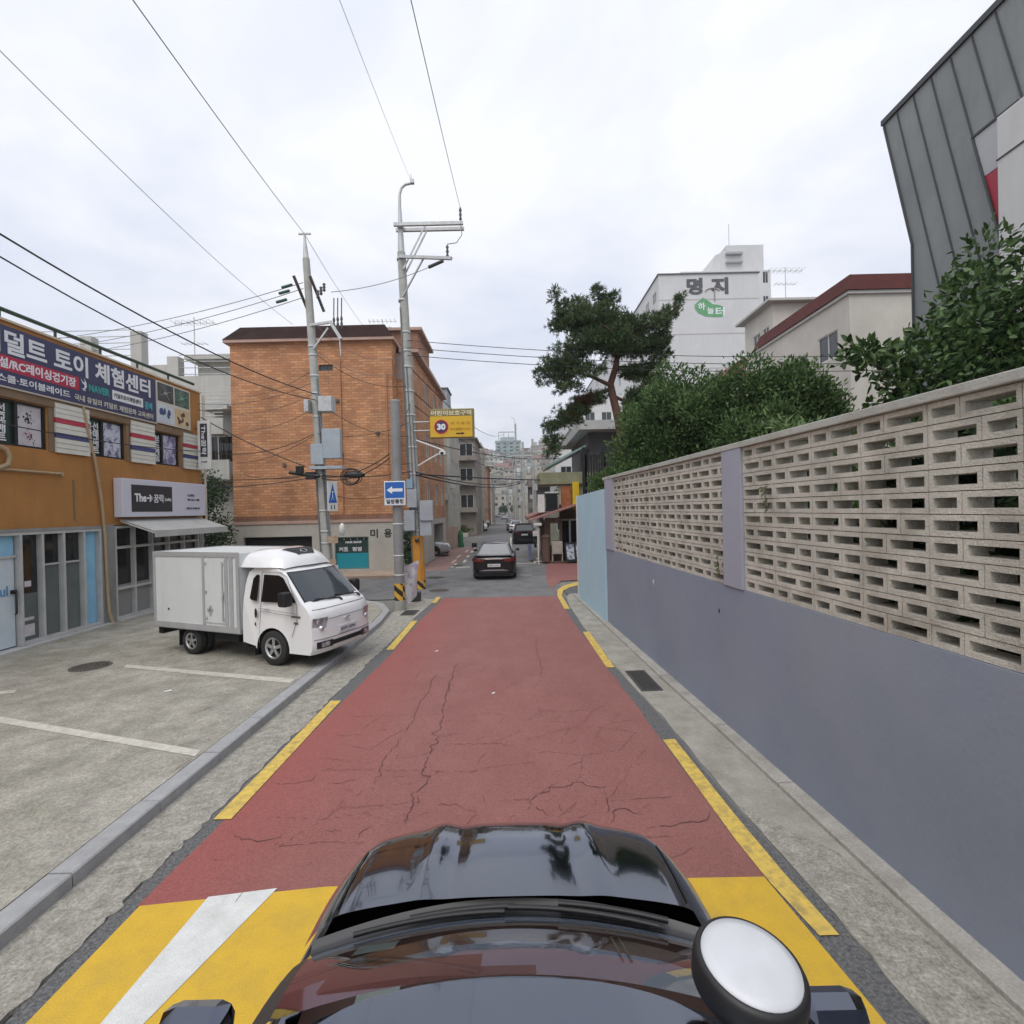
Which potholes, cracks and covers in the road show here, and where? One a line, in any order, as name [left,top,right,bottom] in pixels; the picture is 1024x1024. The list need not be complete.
drain grate [625,670,663,691]
manhole cover [68,661,113,672]
crack [276,631,710,867]
